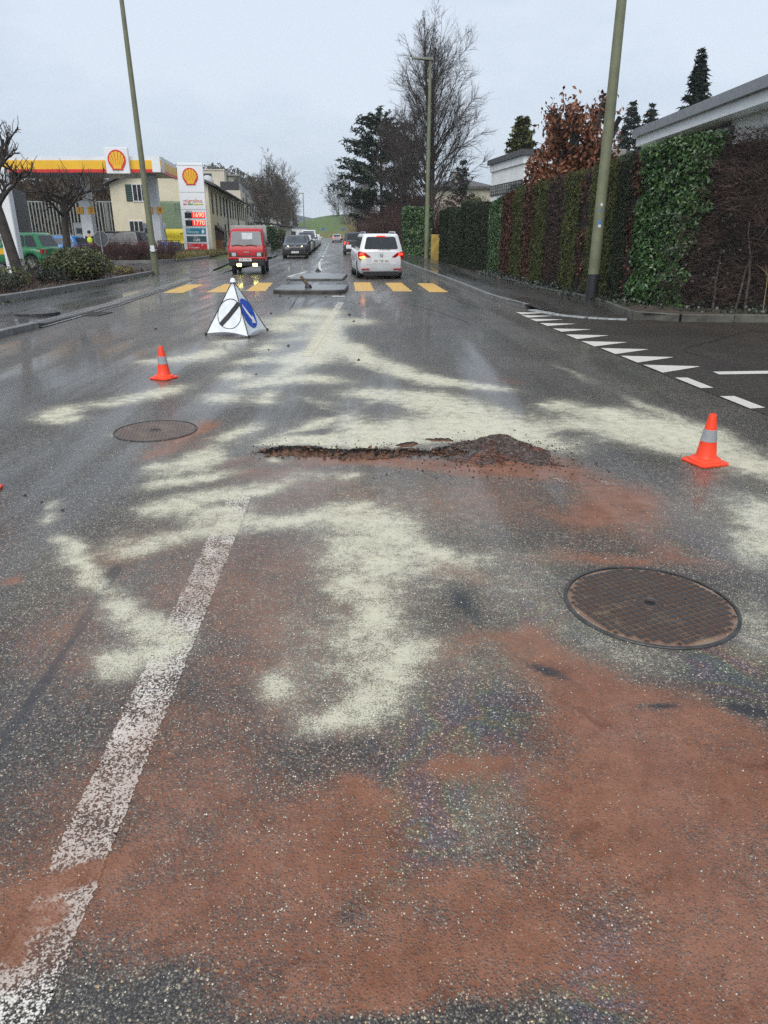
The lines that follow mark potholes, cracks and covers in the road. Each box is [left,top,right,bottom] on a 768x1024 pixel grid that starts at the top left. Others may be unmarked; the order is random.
manhole cover [113,420,198,442]
pothole [253,445,471,460]
manhole cover [564,566,742,650]
